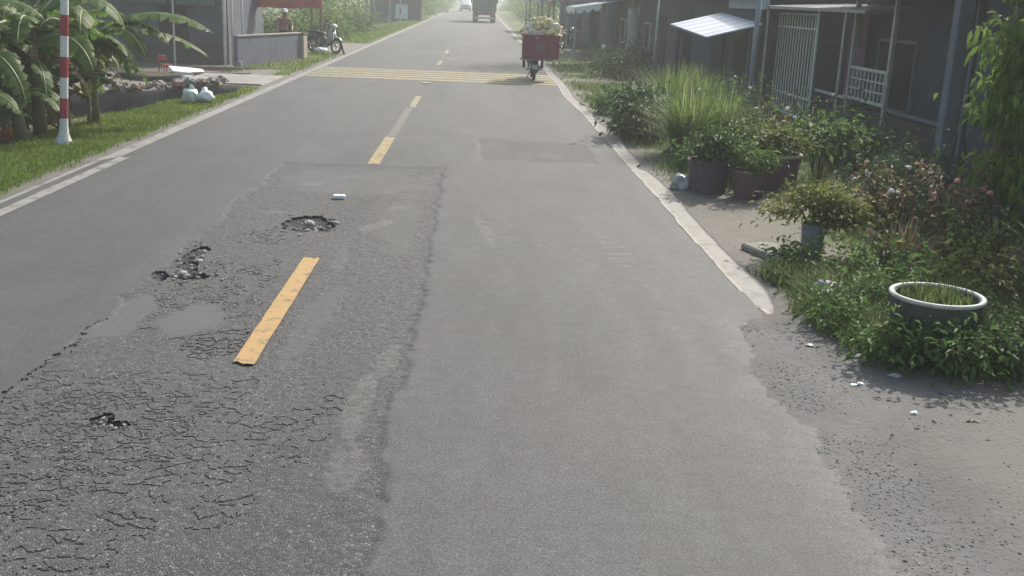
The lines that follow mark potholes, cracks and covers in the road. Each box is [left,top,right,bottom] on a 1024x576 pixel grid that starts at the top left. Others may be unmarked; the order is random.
pothole [89,413,141,429]
pothole [151,242,224,285]
pothole [275,212,340,236]
crack [0,318,349,576]
